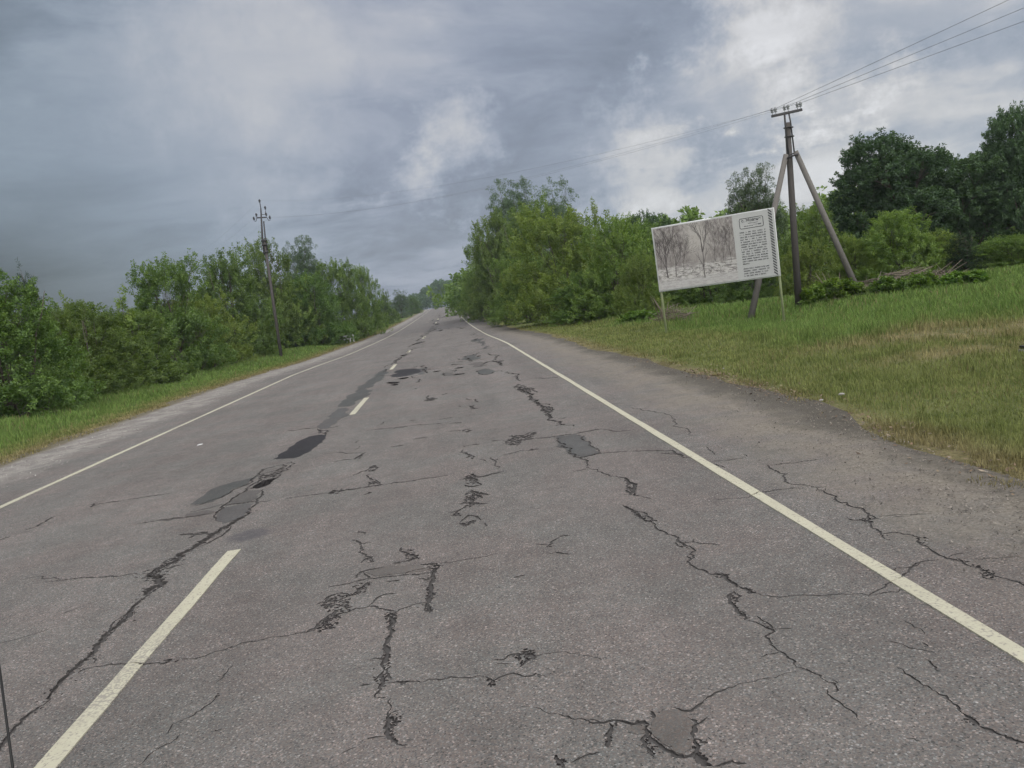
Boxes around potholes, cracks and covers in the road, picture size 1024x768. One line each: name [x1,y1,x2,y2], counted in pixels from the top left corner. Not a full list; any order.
crack [139,327,1024,768]
crack [1,576,80,643]
crack [1,493,168,540]
pothole [251,477,279,489]
